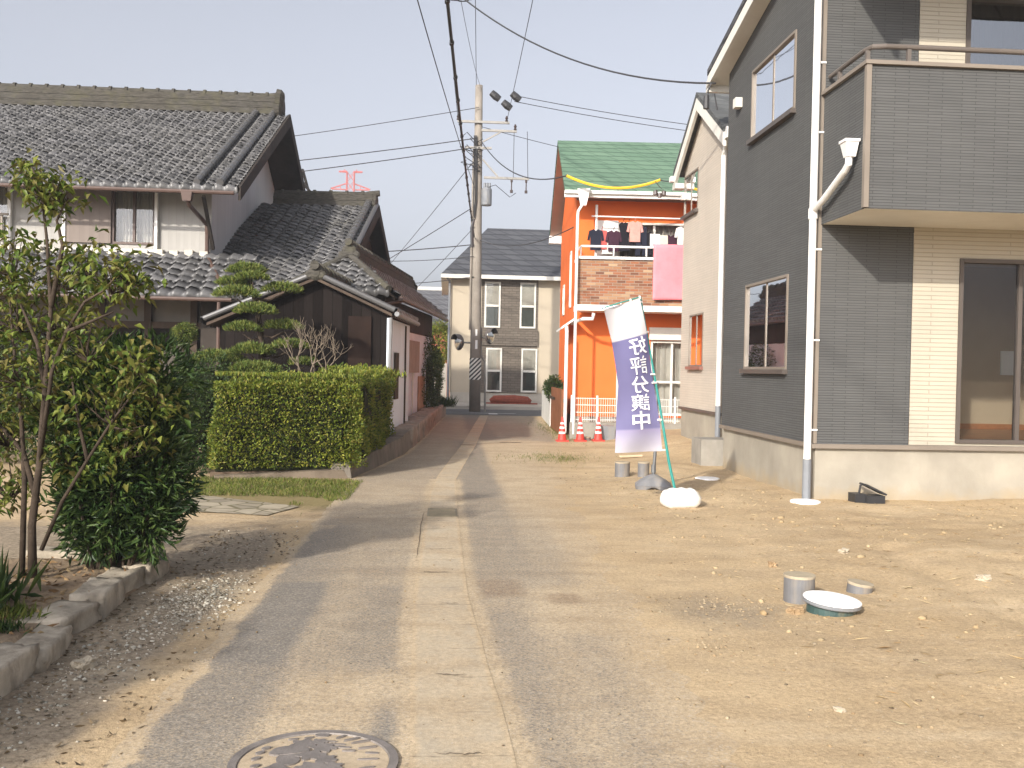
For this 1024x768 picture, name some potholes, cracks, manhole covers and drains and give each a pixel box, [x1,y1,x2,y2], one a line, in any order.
manhole cover [227,730,398,768]
